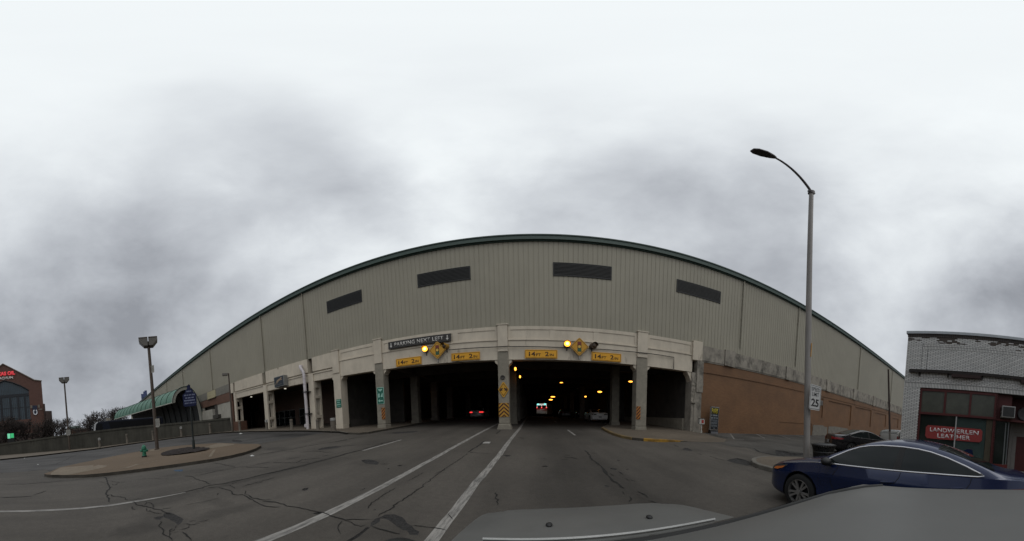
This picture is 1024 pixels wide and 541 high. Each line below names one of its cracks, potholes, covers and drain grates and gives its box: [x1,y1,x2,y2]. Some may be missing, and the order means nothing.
crack [564,451,656,503]
crack [103,436,452,540]
